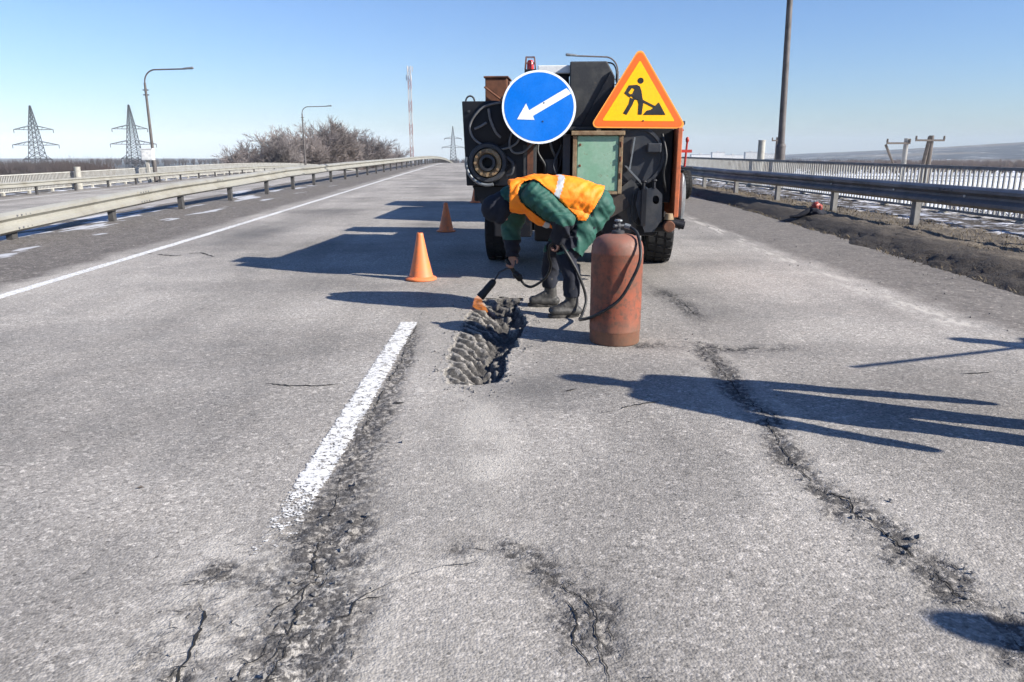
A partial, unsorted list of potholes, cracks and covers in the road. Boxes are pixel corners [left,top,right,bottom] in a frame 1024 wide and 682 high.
crack [146,304,630,682]
crack [646,343,1023,650]
pothole [440,296,531,387]
